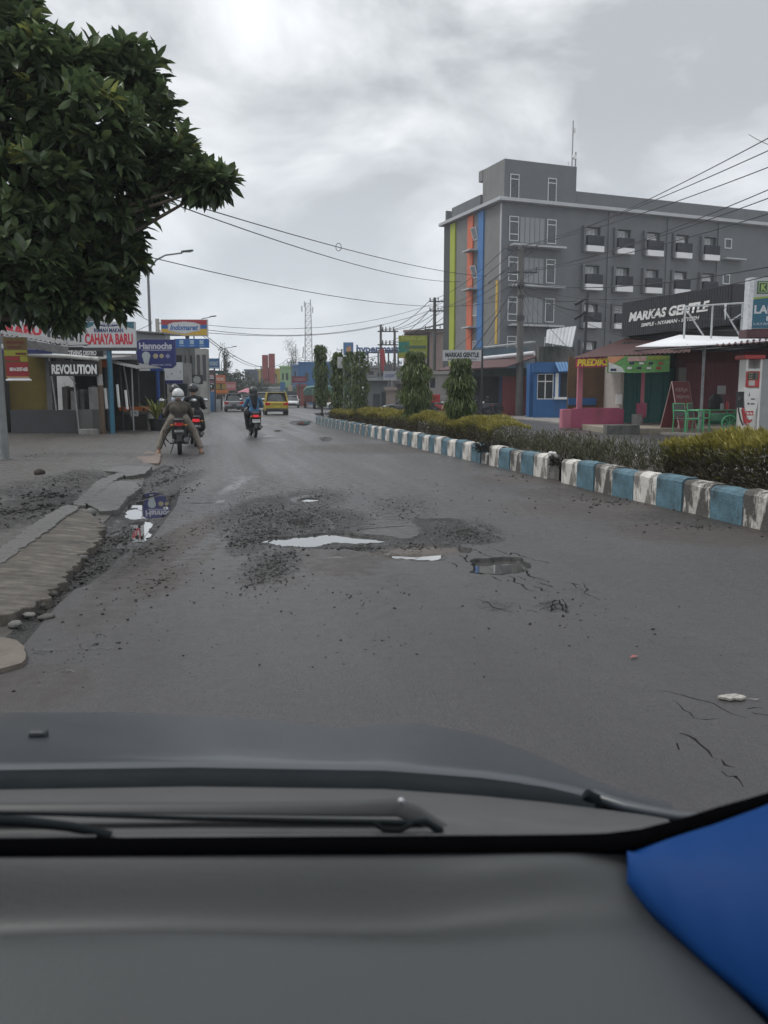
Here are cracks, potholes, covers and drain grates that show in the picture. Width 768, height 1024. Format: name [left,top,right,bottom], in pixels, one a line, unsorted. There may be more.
crack [668,691,768,786]
crack [448,549,600,613]
pothole [469,557,532,575]
pothole [102,465,181,550]
pothole [223,508,506,562]
